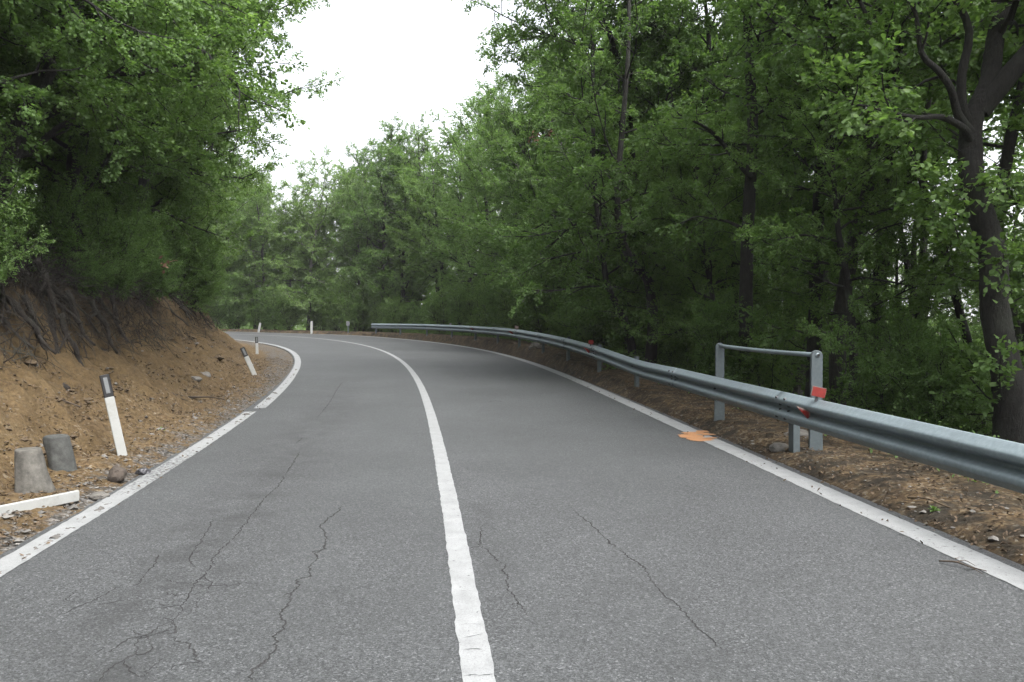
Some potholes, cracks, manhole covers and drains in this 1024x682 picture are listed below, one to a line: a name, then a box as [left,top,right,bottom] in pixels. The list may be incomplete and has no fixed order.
crack [575,511,728,652]
crack [471,526,527,614]
crack [248,506,342,682]
crack [64,477,284,681]
